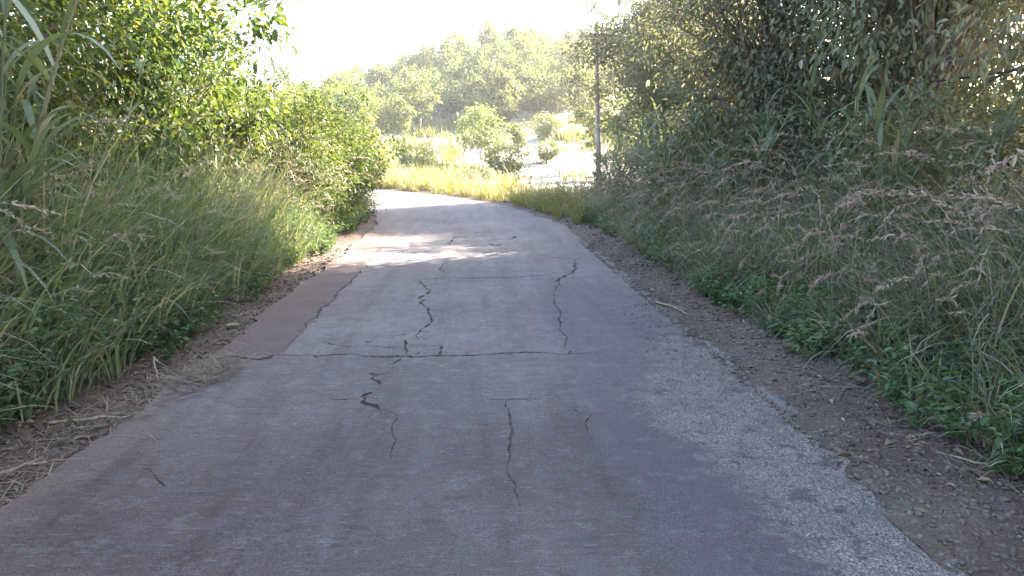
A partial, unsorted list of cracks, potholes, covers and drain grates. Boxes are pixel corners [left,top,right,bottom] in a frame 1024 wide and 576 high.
crack [495,398,528,508]
crack [229,257,601,459]
